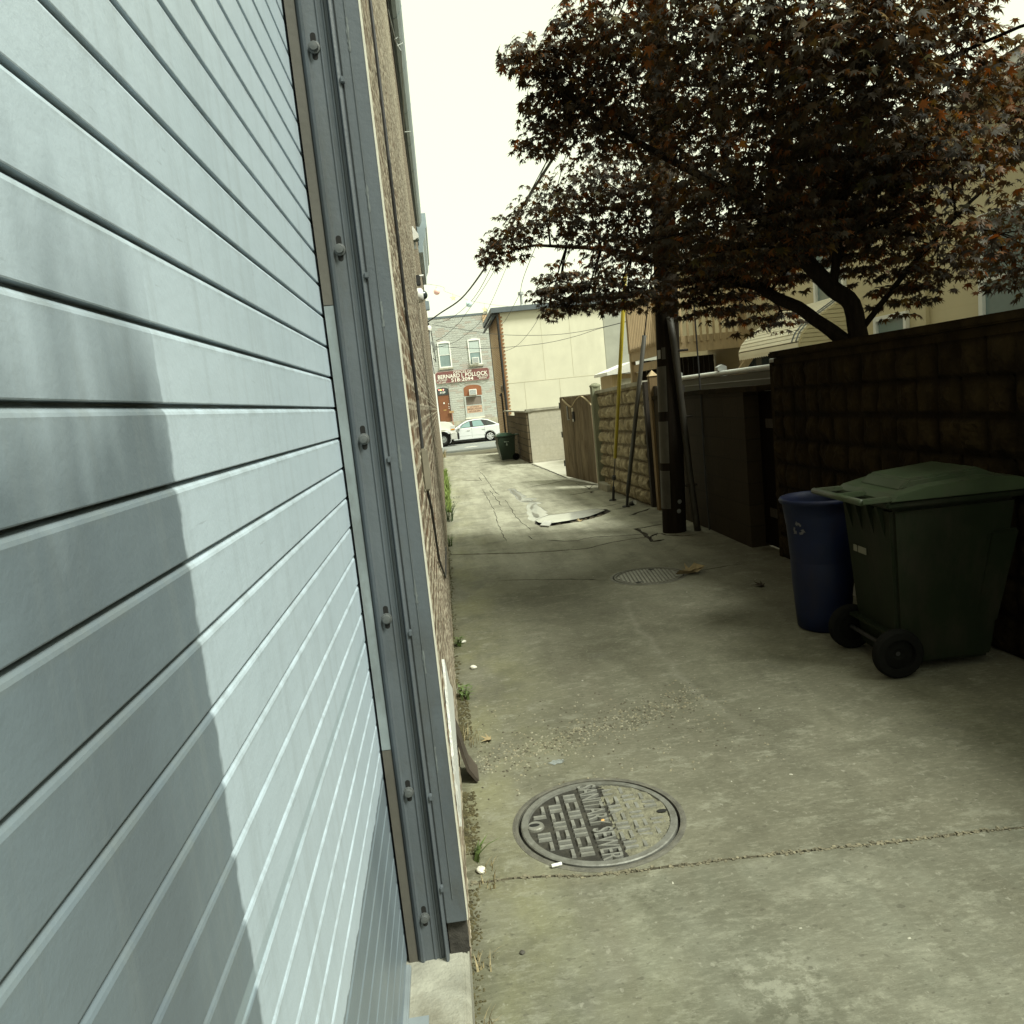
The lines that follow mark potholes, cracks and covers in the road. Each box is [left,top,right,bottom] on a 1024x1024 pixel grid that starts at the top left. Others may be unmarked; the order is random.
crack [479,471,532,539]
crack [551,503,690,550]
manhole cover [513,778,687,872]
